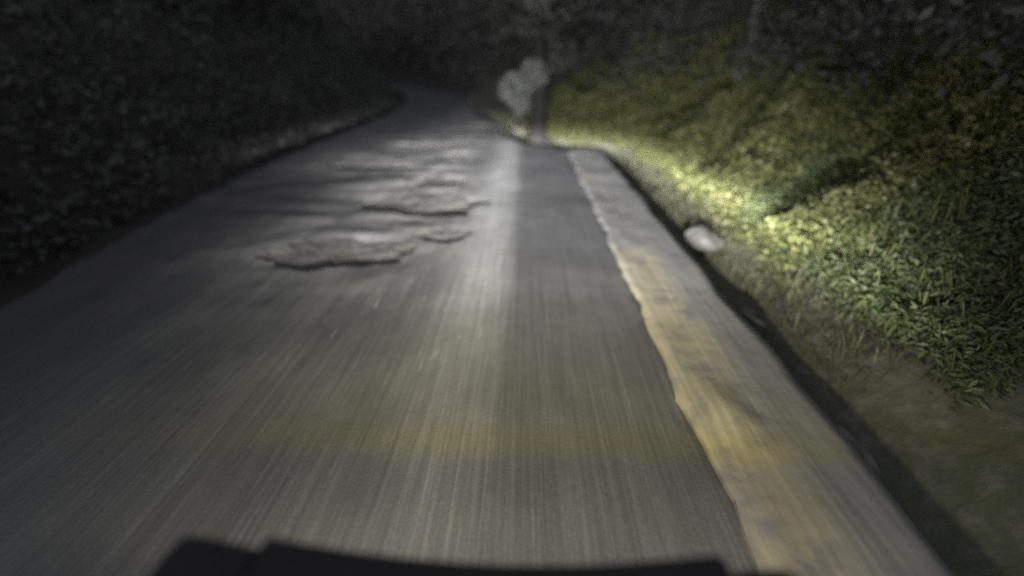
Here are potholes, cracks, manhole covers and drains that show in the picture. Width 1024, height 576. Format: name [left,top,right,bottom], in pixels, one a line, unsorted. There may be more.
pothole [357,192,491,217]
pothole [415,228,474,244]
pothole [310,160,414,172]
pothole [253,236,419,272]
pothole [413,175,467,187]
